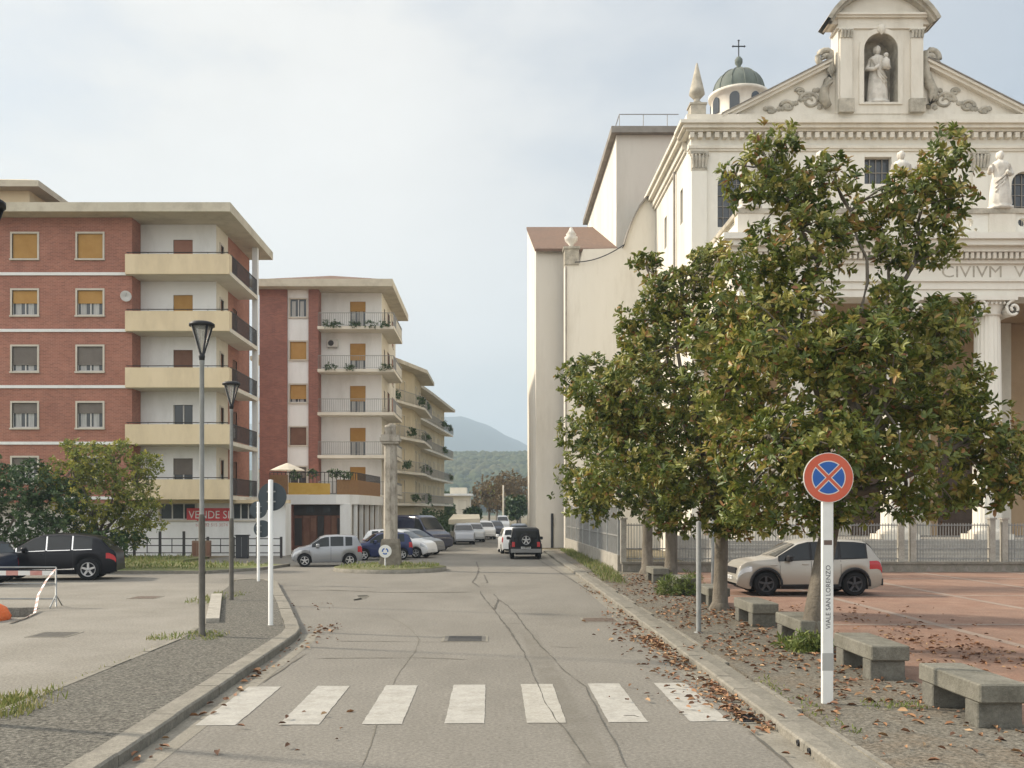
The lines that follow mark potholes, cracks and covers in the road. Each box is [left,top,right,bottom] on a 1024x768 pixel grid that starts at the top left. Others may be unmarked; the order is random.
crack [472,562,639,767]
